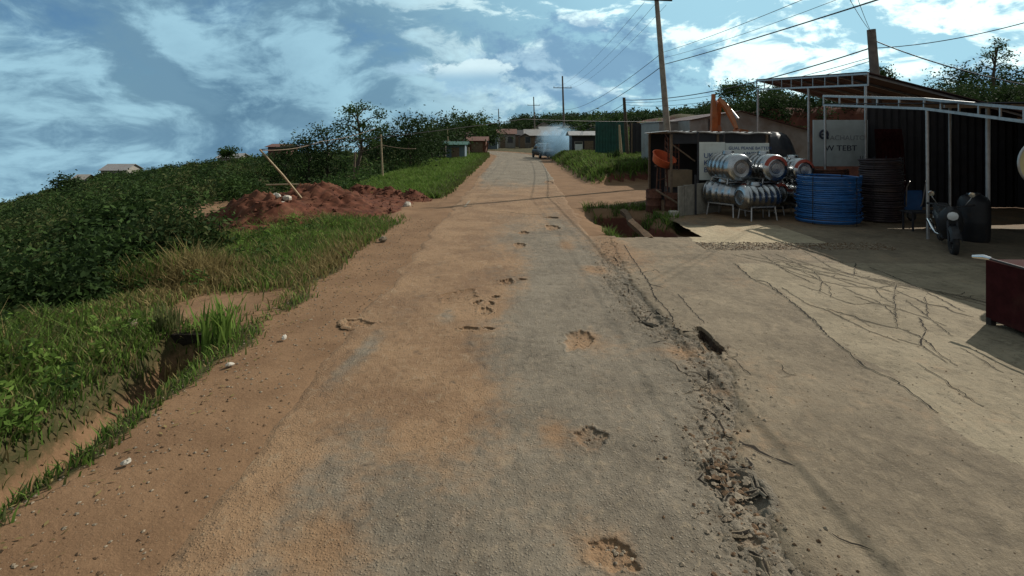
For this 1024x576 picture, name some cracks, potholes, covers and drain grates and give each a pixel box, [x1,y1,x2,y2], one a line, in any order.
pothole [436,288,482,304]
crack [731,251,1002,406]
pothole [720,524,775,556]
pothole [474,306,496,316]
pothole [559,328,599,354]
pothole [579,531,650,576]
pothole [689,455,781,526]
crack [605,242,796,576]
pothole [337,317,379,331]
pothole [566,423,616,455]
